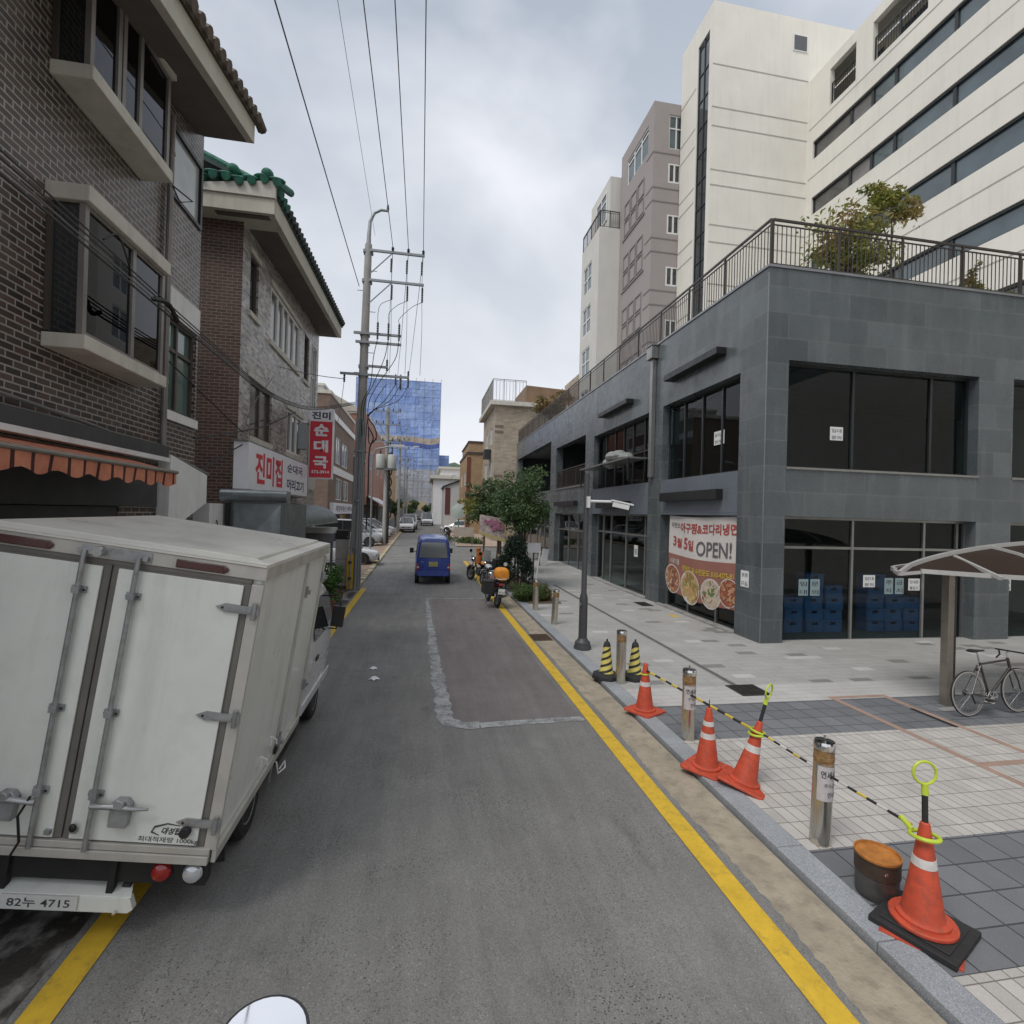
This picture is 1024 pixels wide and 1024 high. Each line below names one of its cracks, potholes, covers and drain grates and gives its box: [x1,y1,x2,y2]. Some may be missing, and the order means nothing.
drain grate [725,684,770,696]
